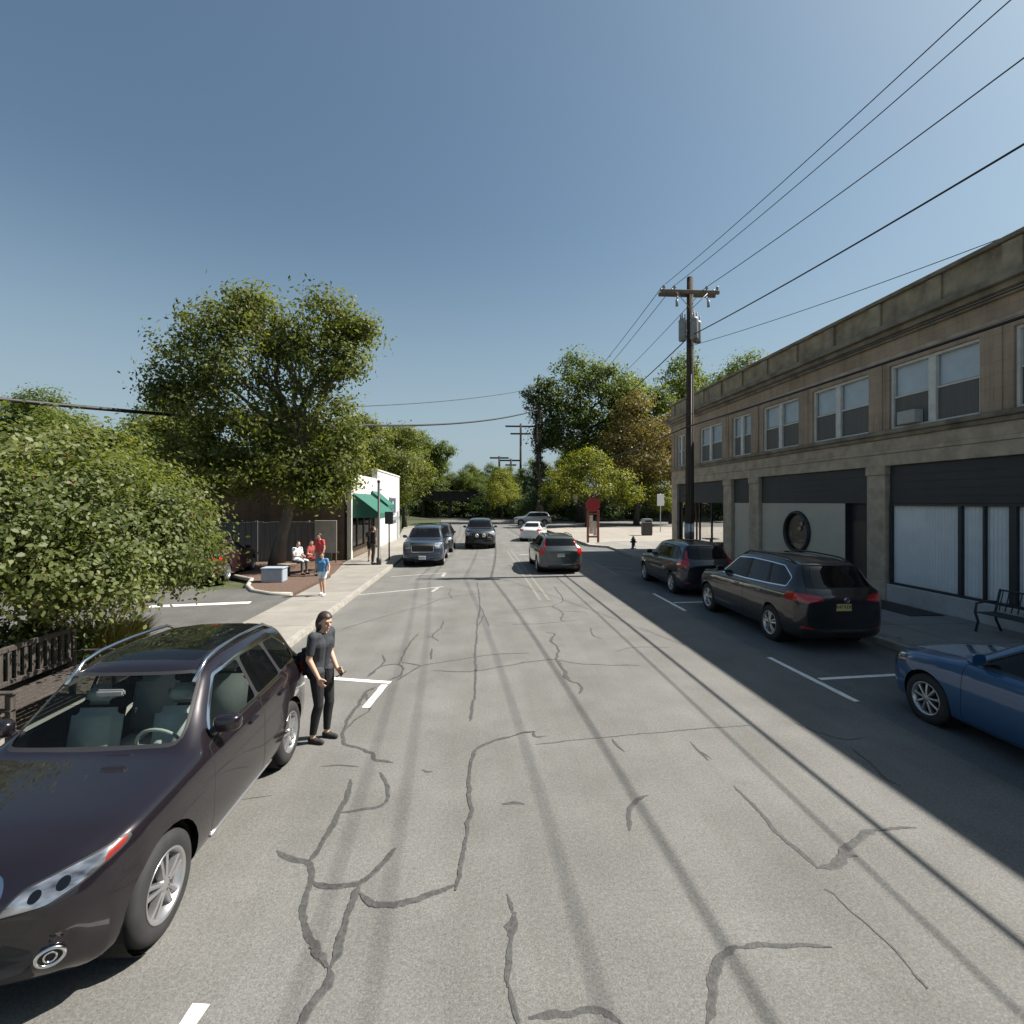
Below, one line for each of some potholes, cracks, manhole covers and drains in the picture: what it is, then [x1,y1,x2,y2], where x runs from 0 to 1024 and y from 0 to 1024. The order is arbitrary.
crack [540,725,749,752]
crack [343,583,670,721]
crack [824,888,928,989]
